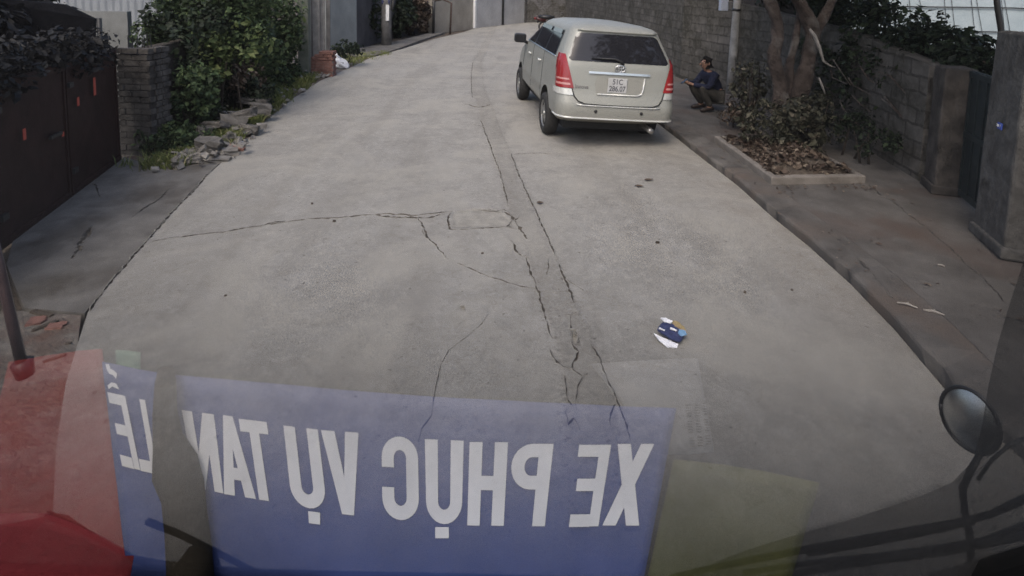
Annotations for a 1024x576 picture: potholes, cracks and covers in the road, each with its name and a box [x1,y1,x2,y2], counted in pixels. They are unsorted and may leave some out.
crack [70,62,632,440]
